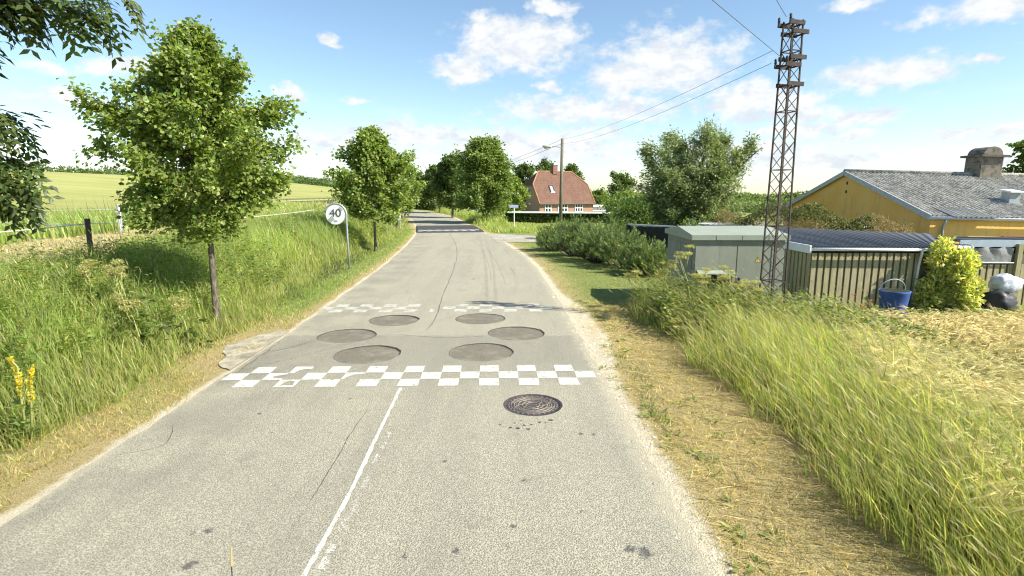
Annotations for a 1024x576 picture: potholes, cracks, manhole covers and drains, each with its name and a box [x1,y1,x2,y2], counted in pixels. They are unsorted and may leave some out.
crack [424,234,514,330]
manhole cover [503,394,563,416]
